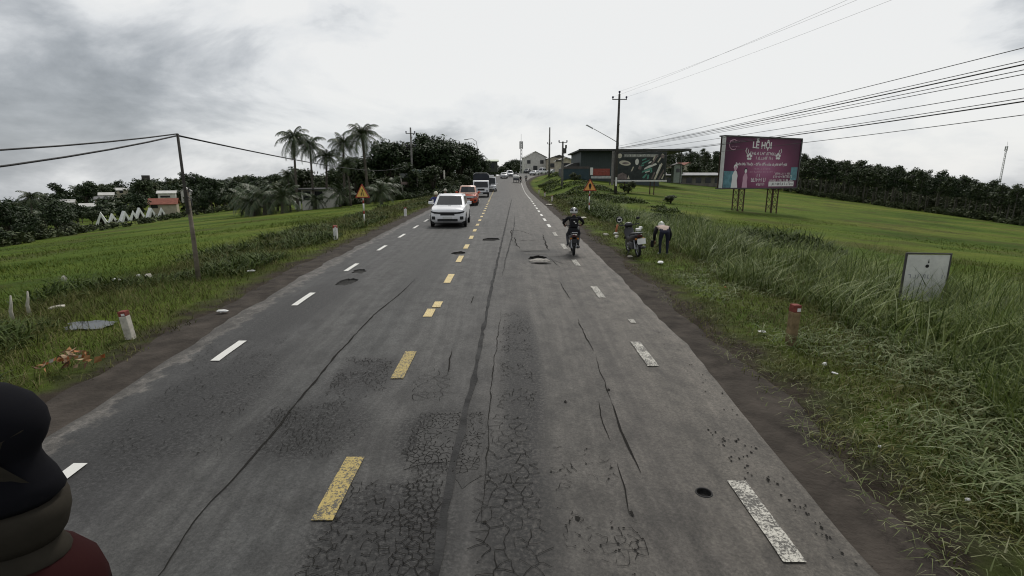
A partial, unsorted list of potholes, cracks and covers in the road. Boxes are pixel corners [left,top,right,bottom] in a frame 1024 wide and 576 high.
crack [510,230,656,576]
crack [105,282,553,576]
